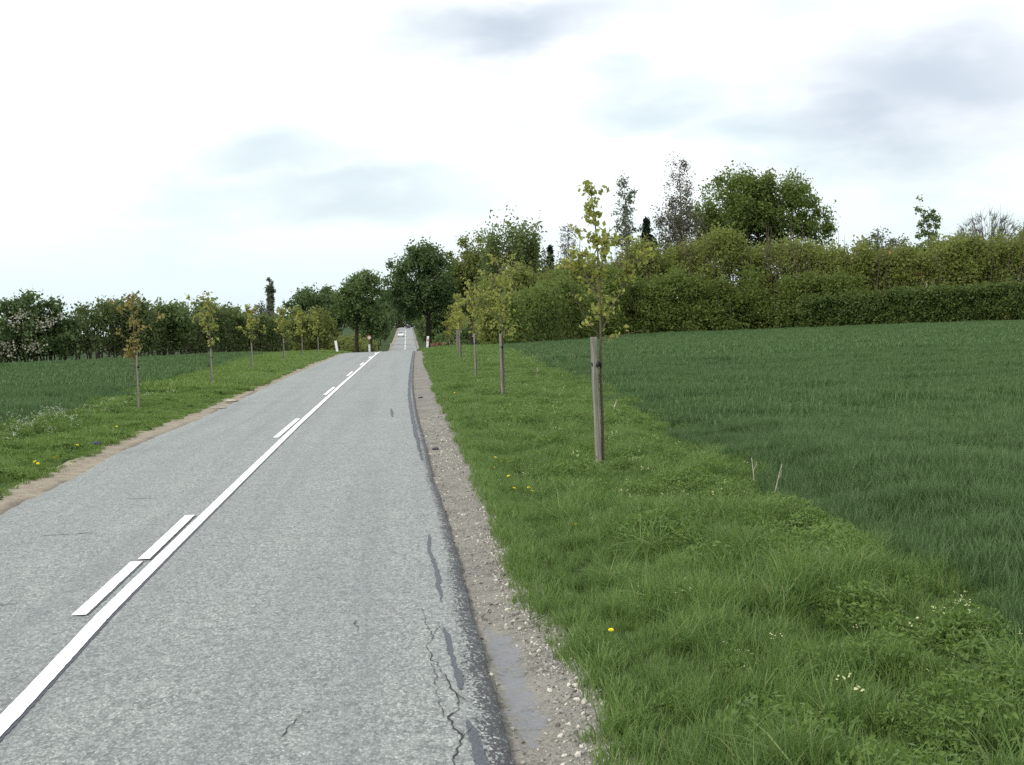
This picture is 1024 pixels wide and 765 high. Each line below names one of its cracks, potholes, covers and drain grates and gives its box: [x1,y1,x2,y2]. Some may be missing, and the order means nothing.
crack [421,607,470,765]
